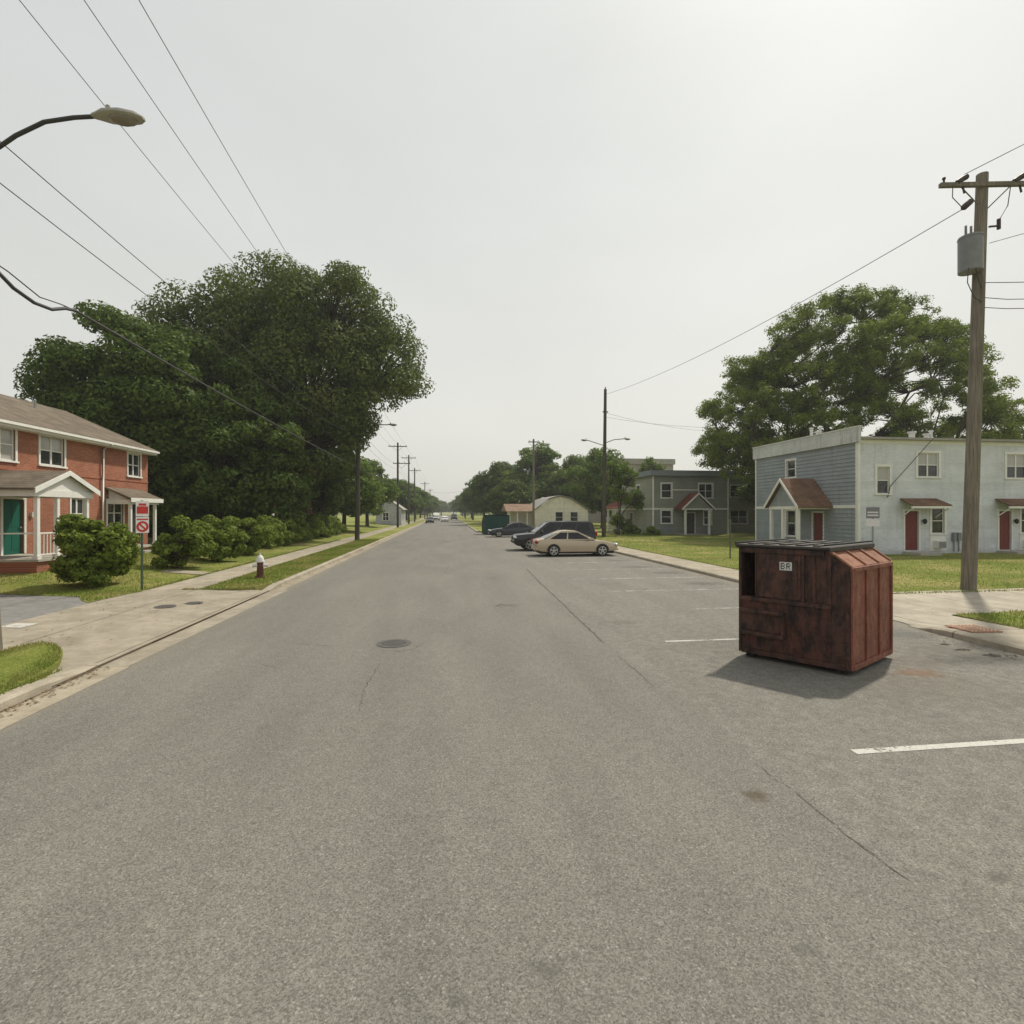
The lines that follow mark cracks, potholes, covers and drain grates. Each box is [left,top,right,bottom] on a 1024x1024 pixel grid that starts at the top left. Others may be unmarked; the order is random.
manhole cover [377,639,412,648]
